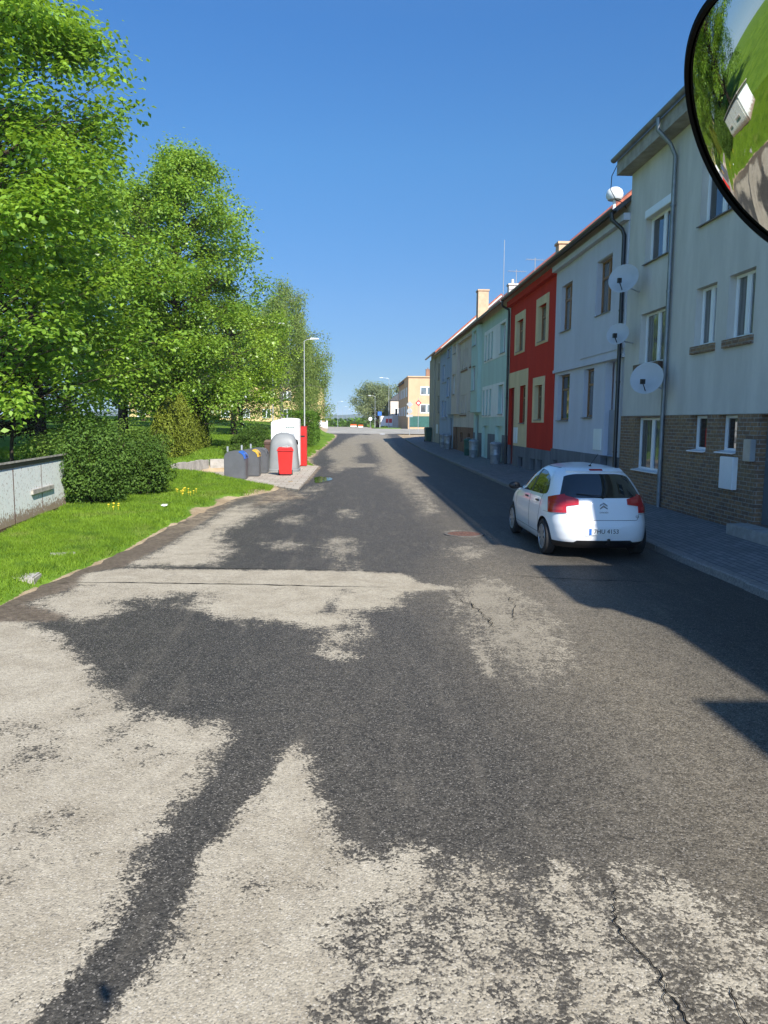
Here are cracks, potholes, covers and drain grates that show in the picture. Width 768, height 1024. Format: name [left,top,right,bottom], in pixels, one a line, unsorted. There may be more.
crack [455,594,534,631]
crack [612,878,696,1024]
